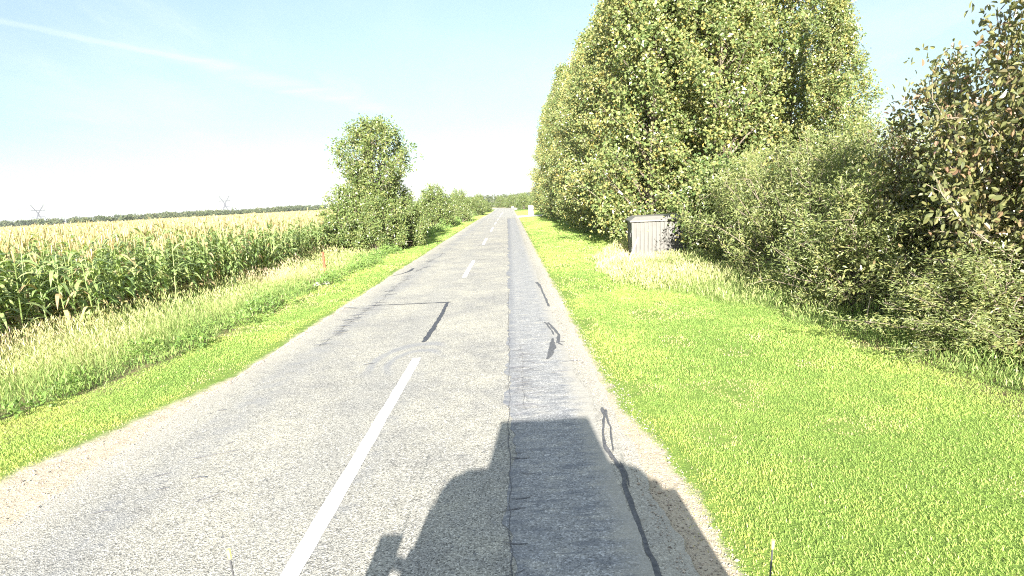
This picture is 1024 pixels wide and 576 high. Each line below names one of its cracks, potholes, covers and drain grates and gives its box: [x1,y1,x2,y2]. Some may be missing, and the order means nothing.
crack [503,344,569,407]
